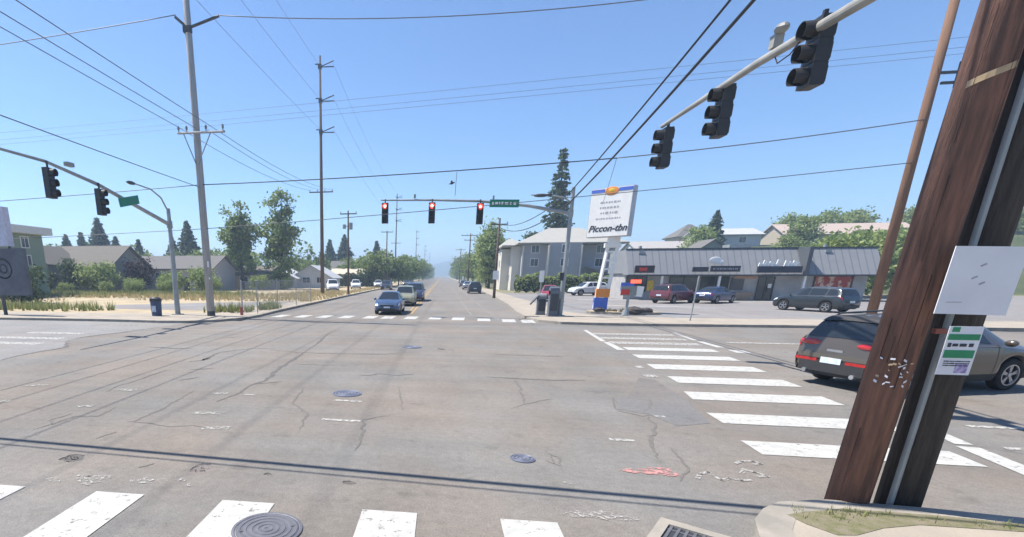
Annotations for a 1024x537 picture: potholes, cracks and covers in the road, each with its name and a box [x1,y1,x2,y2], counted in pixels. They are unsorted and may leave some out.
crack [355,373,412,450]
drain grate [647,517,730,537]
crack [546,451,563,467]
manhole cover [231,512,303,537]
crack [496,377,565,408]
crack [612,397,690,481]
crack [36,333,413,438]
manhole cover [510,454,535,463]
